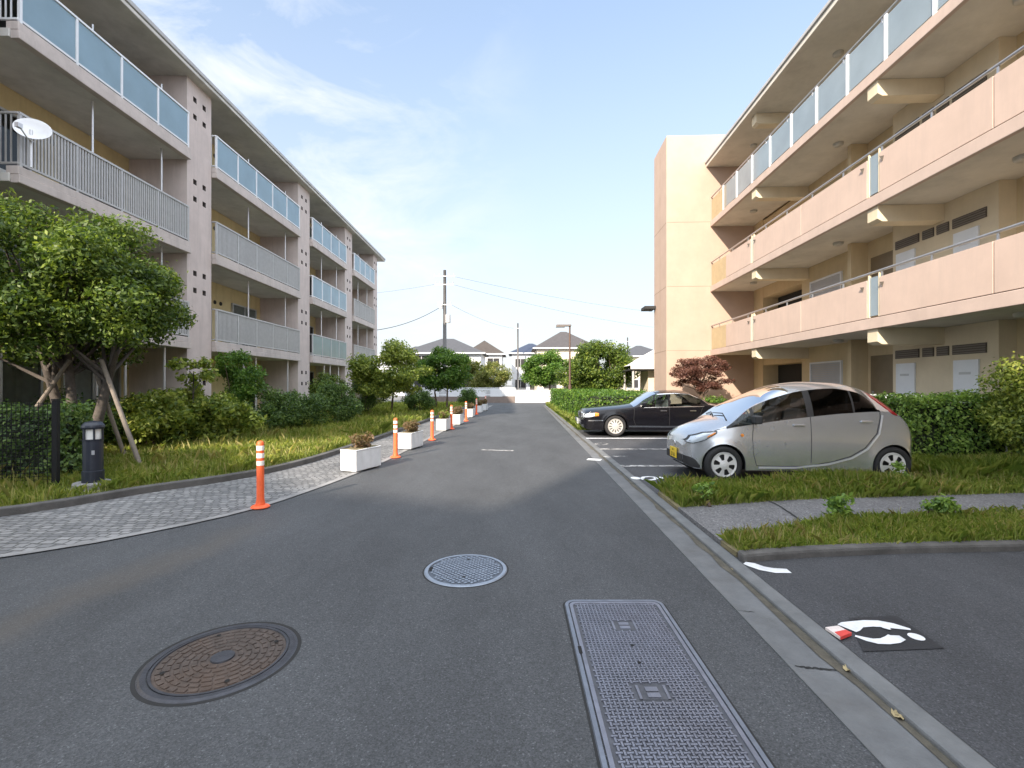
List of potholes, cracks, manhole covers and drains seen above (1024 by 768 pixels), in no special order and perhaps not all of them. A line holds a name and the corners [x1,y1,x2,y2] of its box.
manhole cover [130,622,302,707]
manhole cover [422,554,509,588]
manhole cover [563,600,777,768]
